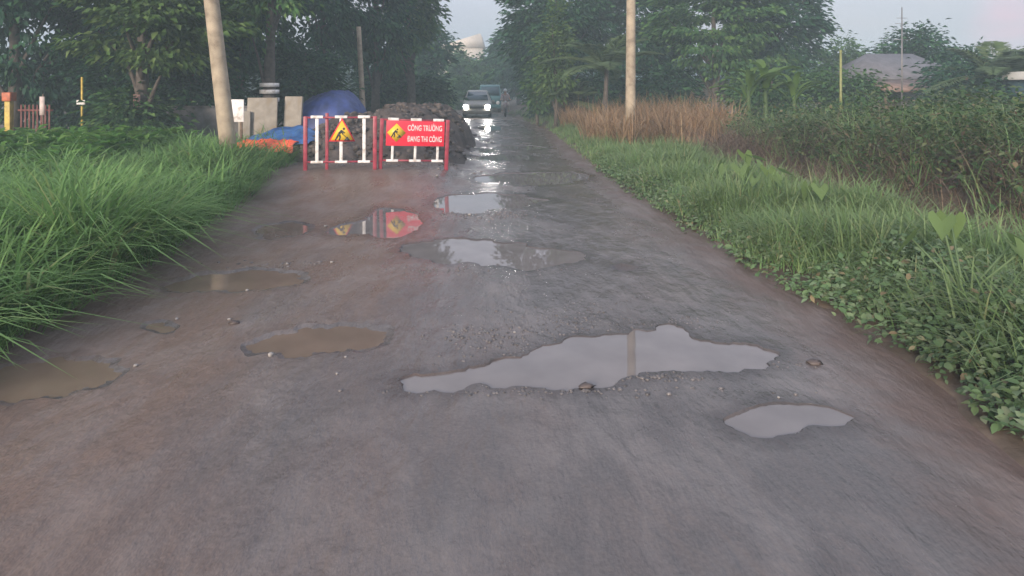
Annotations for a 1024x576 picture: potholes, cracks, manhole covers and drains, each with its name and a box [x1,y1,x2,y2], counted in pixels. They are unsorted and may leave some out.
pothole [240,322,395,359]
pothole [473,172,590,186]
pothole [398,237,586,271]
pothole [723,402,857,438]
pothole [139,319,181,334]
pothole [396,323,780,393]
pothole [433,192,549,214]
pothole [0,352,130,406]
pothole [155,266,311,293]
pothole [325,207,424,238]
